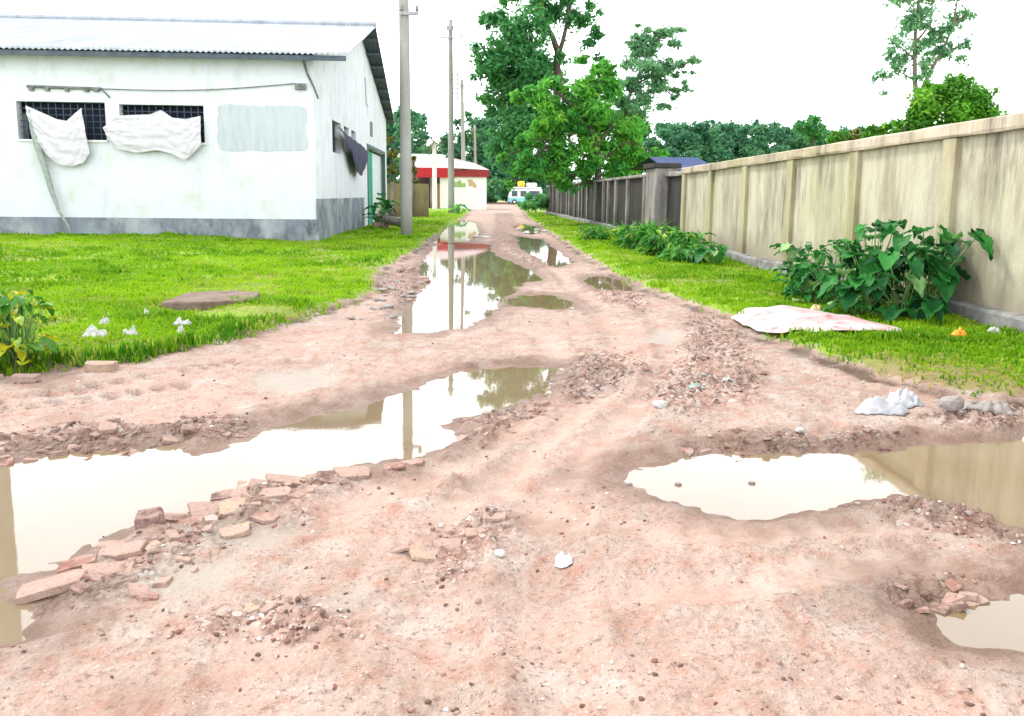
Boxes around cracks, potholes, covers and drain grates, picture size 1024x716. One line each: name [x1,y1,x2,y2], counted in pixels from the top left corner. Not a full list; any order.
pothole [879,572,1024,658]
pothole [581,275,638,291]
pothole [431,221,481,244]
pothole [0,360,573,584]
pothole [513,236,575,268]
pothole [600,430,1024,533]
pothole [382,242,548,334]
pothole [516,224,542,235]
